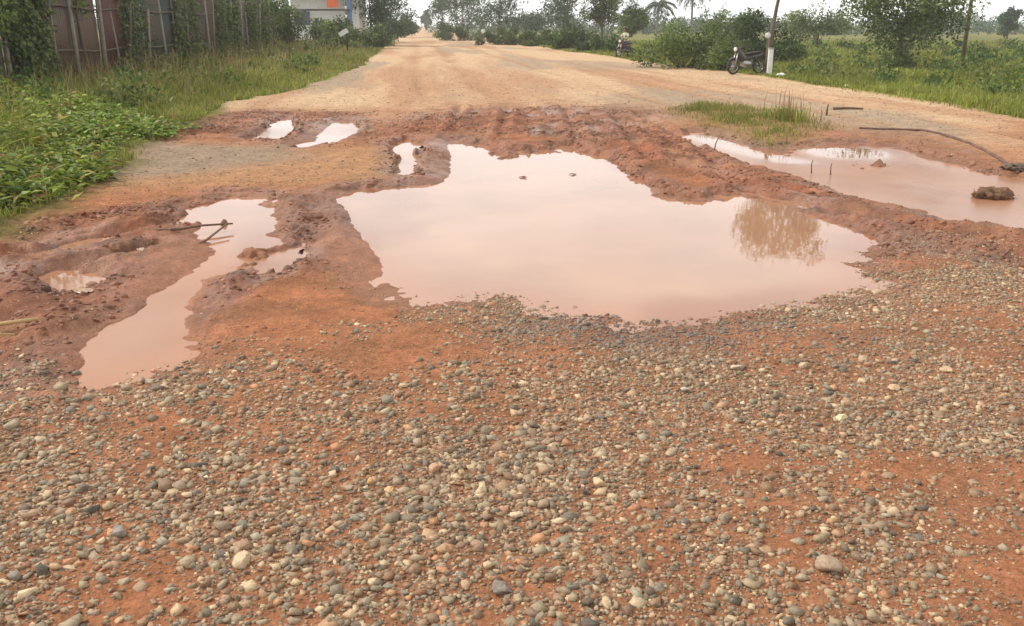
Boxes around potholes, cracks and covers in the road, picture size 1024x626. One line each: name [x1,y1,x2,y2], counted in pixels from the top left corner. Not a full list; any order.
pothole [12,189,313,410]
pothole [672,128,1024,228]
pothole [279,117,367,147]
pothole [288,134,907,336]
pothole [240,115,300,139]
